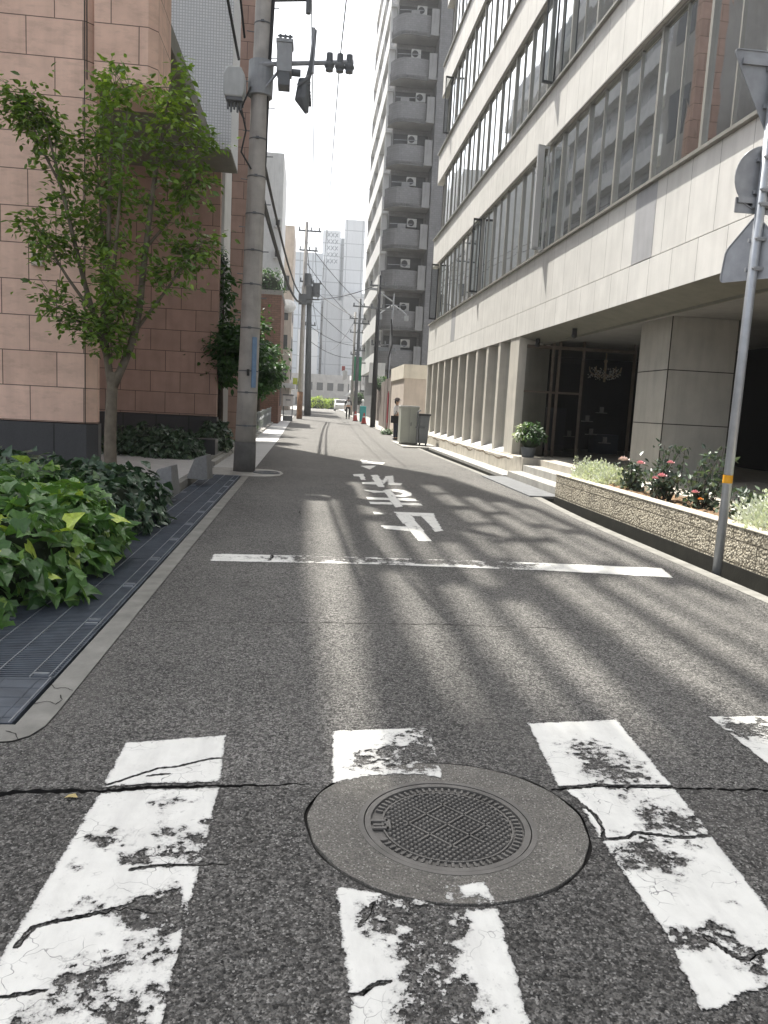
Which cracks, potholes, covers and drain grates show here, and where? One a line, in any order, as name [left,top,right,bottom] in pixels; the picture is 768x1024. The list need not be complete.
drain grate [171,492,224,504]
drain grate [134,523,195,542]
crack [703,937,763,961]
crack [587,809,695,841]
drain grate [120,539,181,562]
drain grate [181,485,230,495]
drain grate [0,677,53,725]
drain grate [166,500,216,513]
crack [21,907,166,944]
drain grate [85,558,163,588]
manhole cover [304,763,592,907]
drain grate [189,479,236,488]
